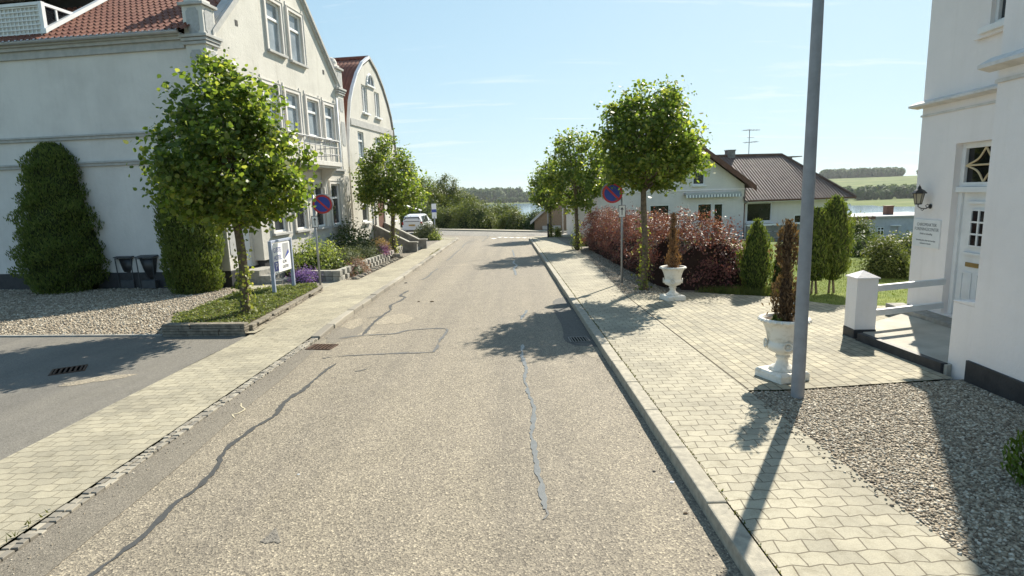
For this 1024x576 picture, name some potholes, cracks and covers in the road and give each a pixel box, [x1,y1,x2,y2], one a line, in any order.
drain grate [48,364,88,376]
